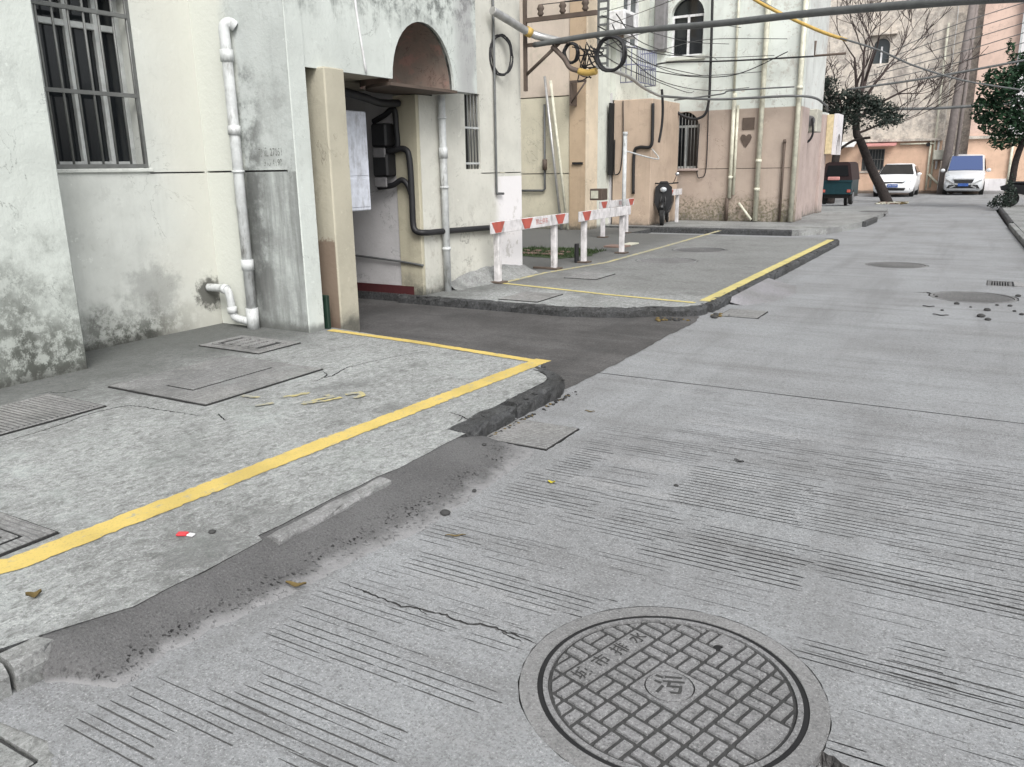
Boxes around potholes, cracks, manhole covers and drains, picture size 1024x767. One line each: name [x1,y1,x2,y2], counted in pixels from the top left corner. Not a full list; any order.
crack [316,350,429,381]
drain grate [986,281,1024,293]
manhole cover [721,309,768,319]
crack [340,582,536,648]
manhole cover [519,607,831,767]
manhole cover [487,419,579,451]
manhole cover [0,512,59,557]
manhole cover [108,355,323,406]
